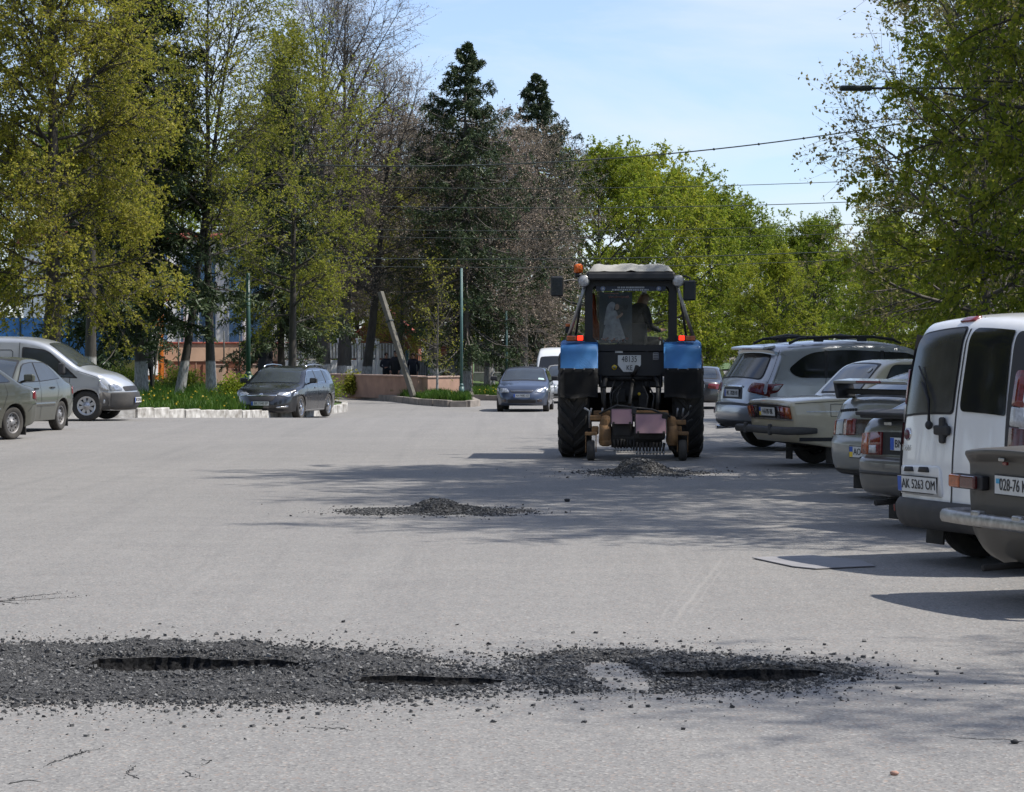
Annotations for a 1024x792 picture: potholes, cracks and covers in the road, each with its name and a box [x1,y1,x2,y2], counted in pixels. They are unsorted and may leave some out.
pothole [361,679,503,690]
pothole [90,661,297,675]
pothole [664,672,820,685]
crack [9,745,104,784]
crack [0,593,87,605]
